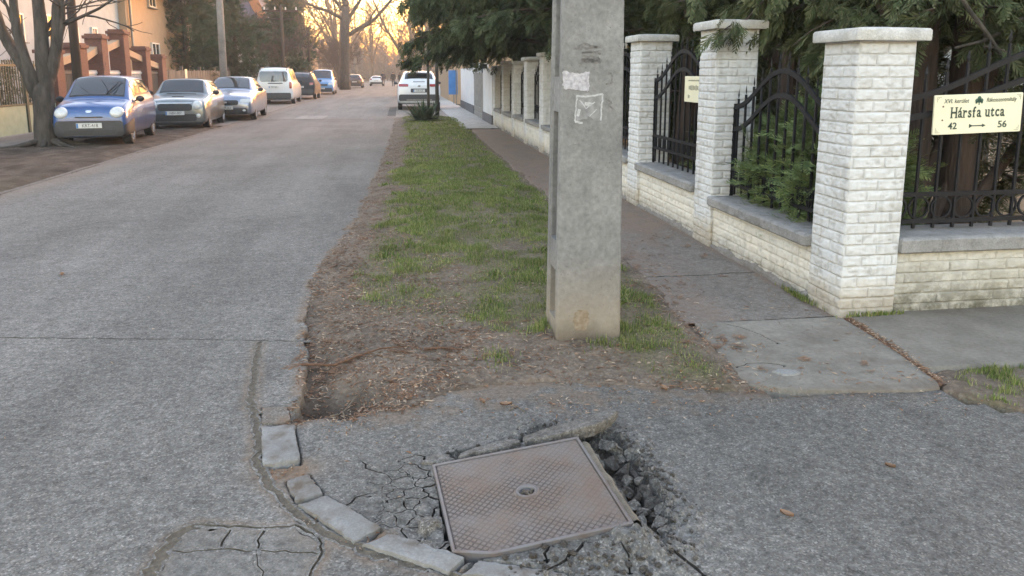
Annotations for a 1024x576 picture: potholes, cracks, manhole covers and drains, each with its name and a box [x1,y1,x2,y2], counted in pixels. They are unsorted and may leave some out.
crack [0,337,464,576]
manhole cover [432,437,642,566]
crack [724,323,779,344]
